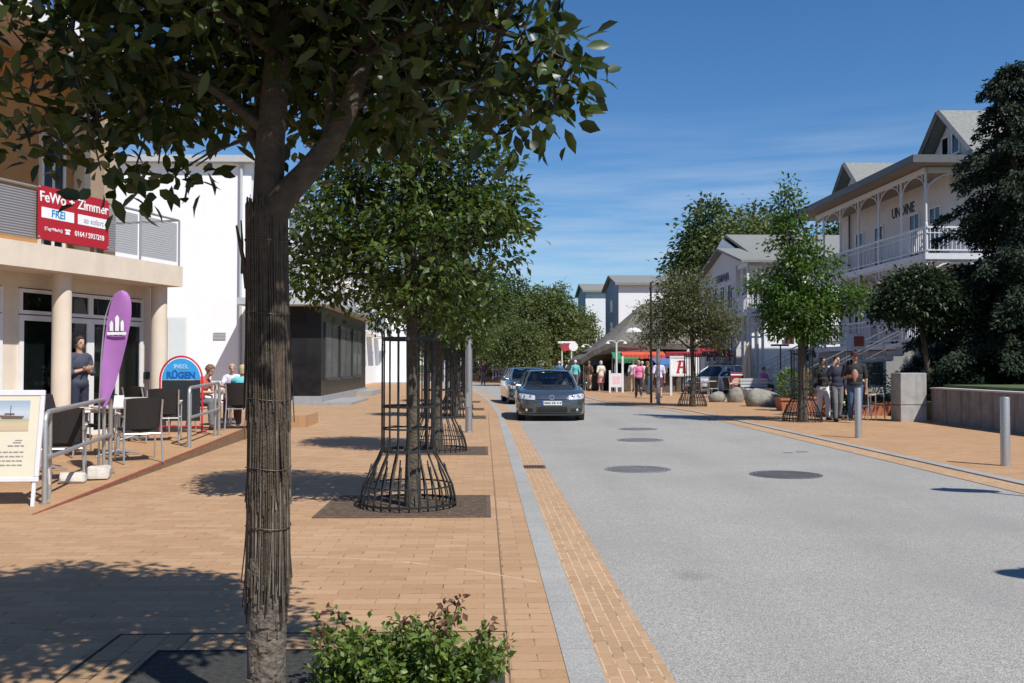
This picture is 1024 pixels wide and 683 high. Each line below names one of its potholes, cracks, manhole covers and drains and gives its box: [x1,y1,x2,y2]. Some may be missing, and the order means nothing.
manhole cover [749,470,823,479]
manhole cover [605,465,671,473]
